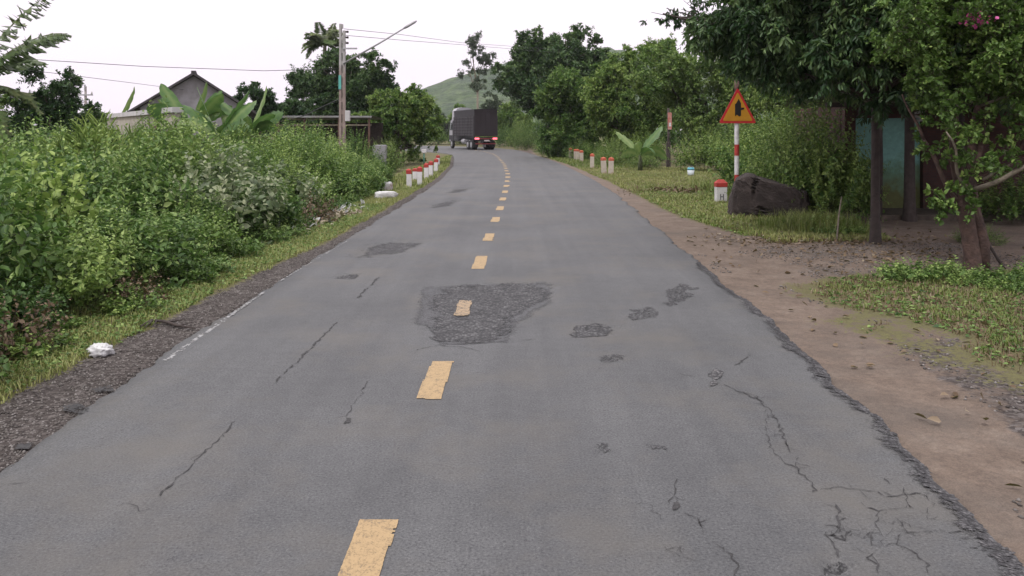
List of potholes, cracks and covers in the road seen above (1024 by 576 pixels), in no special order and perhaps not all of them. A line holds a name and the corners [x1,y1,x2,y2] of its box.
crack [724,384,979,574]
pothole [569,323,612,337]
pothole [664,284,699,306]
crack [122,421,235,512]
crack [276,322,338,381]
crack [633,478,739,576]
pothole [628,307,659,320]
